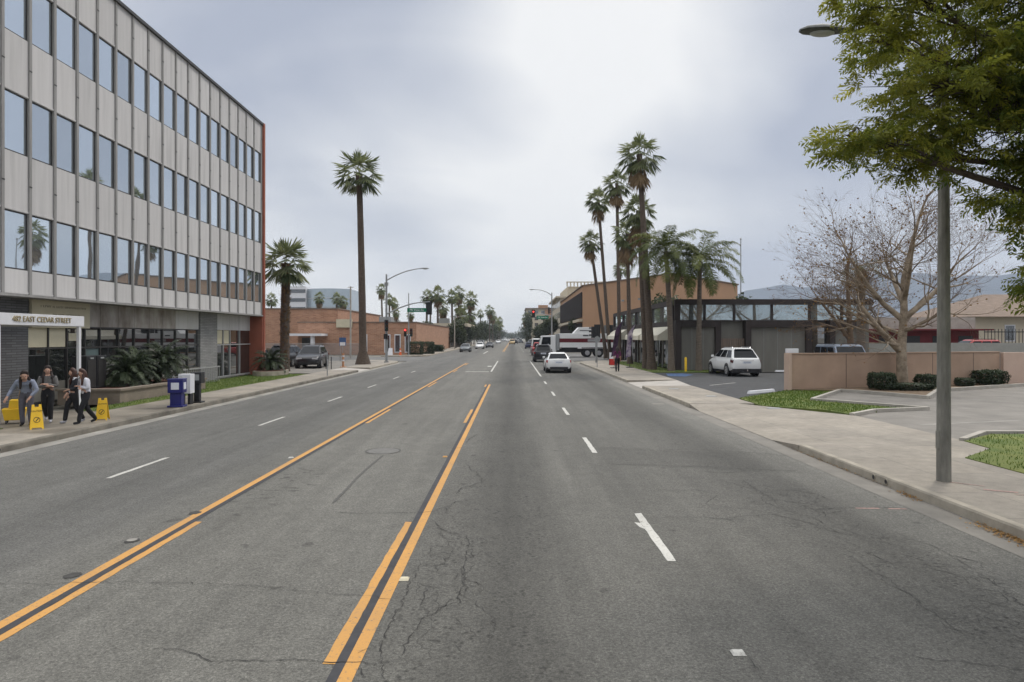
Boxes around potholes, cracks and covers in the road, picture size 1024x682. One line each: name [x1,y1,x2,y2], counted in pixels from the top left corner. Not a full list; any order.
crack [816,521,1024,640]
crack [907,654,1023,670]
